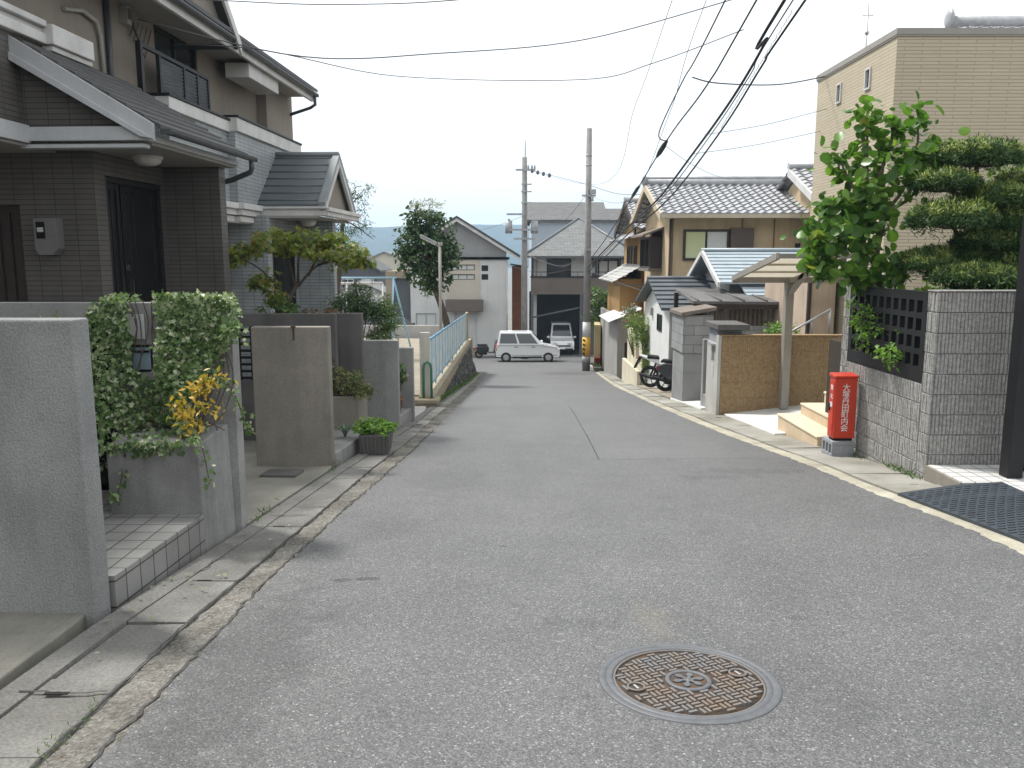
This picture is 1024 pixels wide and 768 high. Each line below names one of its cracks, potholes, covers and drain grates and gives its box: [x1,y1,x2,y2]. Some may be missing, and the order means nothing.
manhole cover [598,644,782,725]
